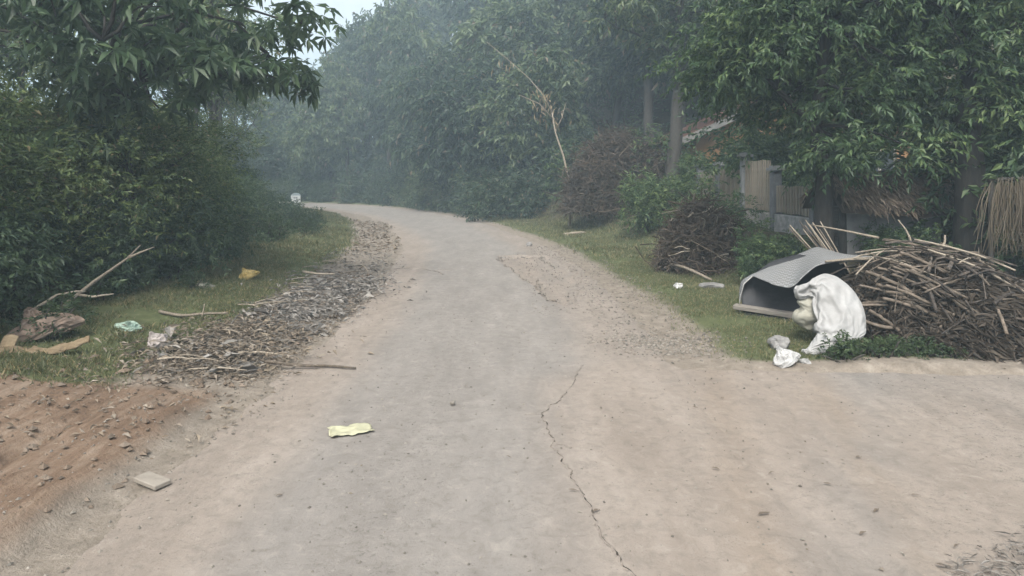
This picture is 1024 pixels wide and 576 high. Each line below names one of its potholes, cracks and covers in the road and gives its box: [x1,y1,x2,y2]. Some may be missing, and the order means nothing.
crack [526,365,637,576]
